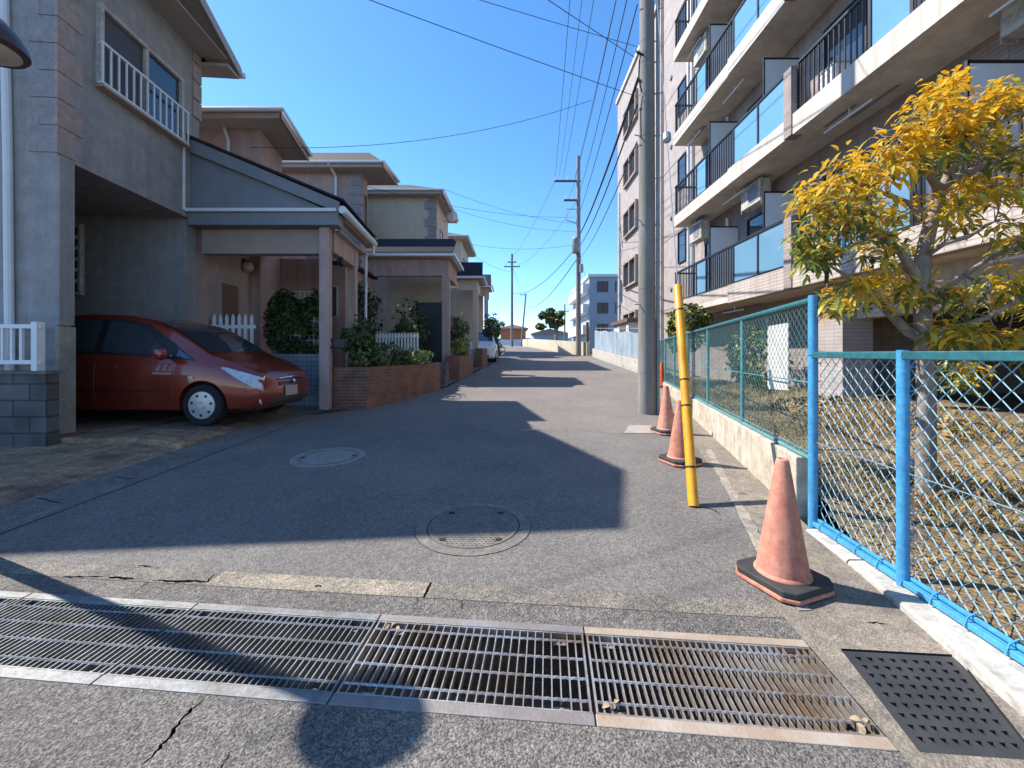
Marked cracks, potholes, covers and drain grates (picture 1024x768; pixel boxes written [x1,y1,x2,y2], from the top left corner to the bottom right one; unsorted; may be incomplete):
drain grate [92,603,381,705]
manhole cover [289,447,366,468]
drain grate [328,614,595,727]
crack [141,700,230,768]
drain grate [584,627,899,752]
drain grate [0,591,33,610]
crack [62,565,214,591]
manhole cover [414,502,531,557]
